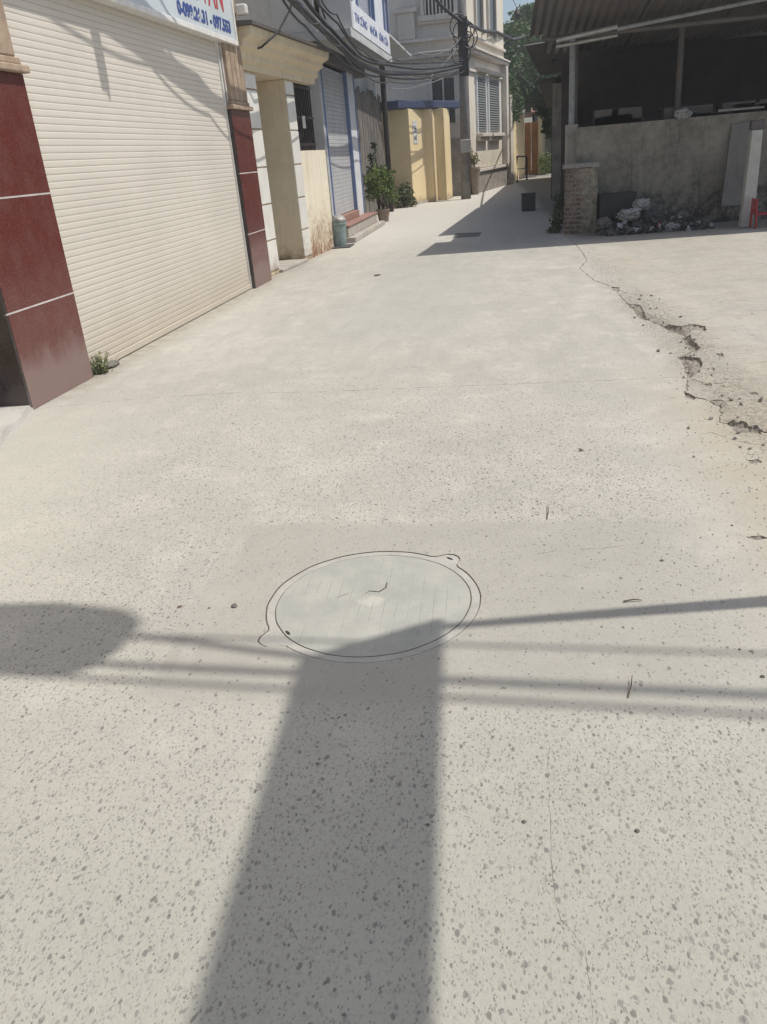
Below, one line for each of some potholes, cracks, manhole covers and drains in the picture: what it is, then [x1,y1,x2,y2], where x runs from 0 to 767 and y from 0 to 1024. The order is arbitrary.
manhole cover [257,551,481,663]
crack [547,749,593,1012]
crack [66,238,767,444]
